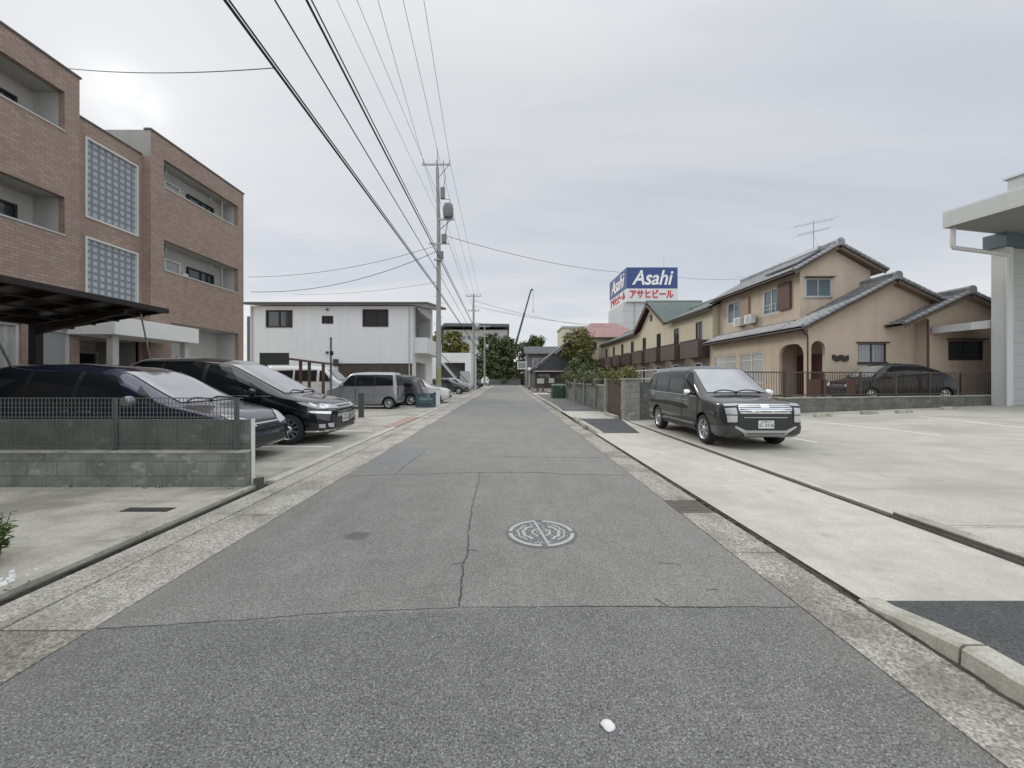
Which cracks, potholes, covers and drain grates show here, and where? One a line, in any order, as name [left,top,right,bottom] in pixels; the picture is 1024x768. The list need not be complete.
manhole cover [505,520,577,548]
crack [452,472,480,606]
